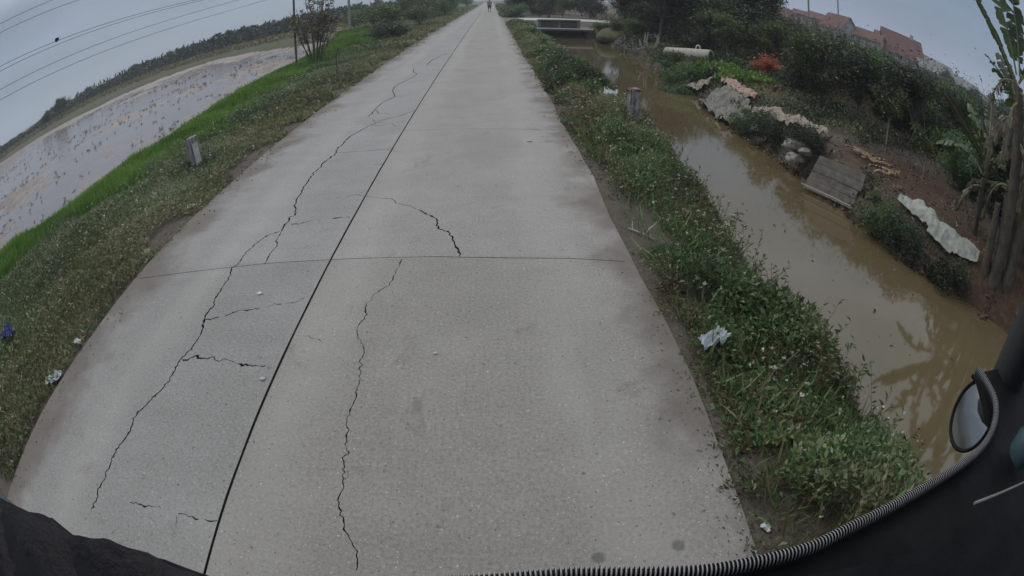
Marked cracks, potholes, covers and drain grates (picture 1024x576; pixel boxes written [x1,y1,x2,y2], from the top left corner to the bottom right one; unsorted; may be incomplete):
crack [91,114,461,510]
crack [337,260,402,570]
